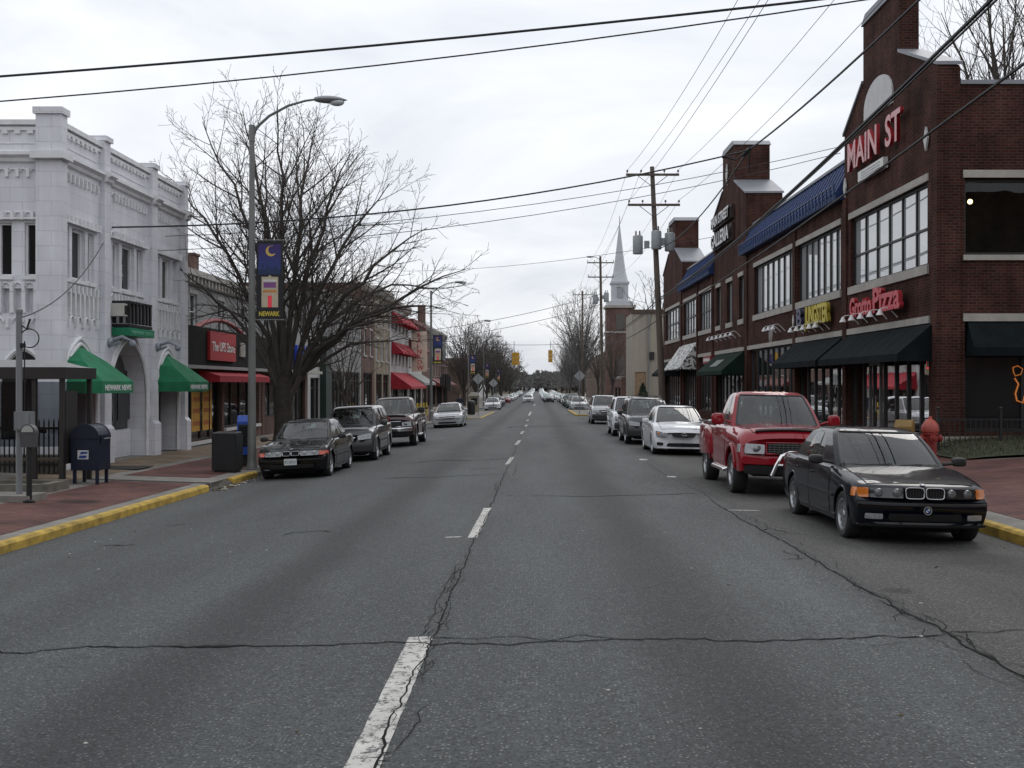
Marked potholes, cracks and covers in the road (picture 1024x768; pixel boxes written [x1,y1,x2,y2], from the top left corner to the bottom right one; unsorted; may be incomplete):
crack [0,420,1024,768]
